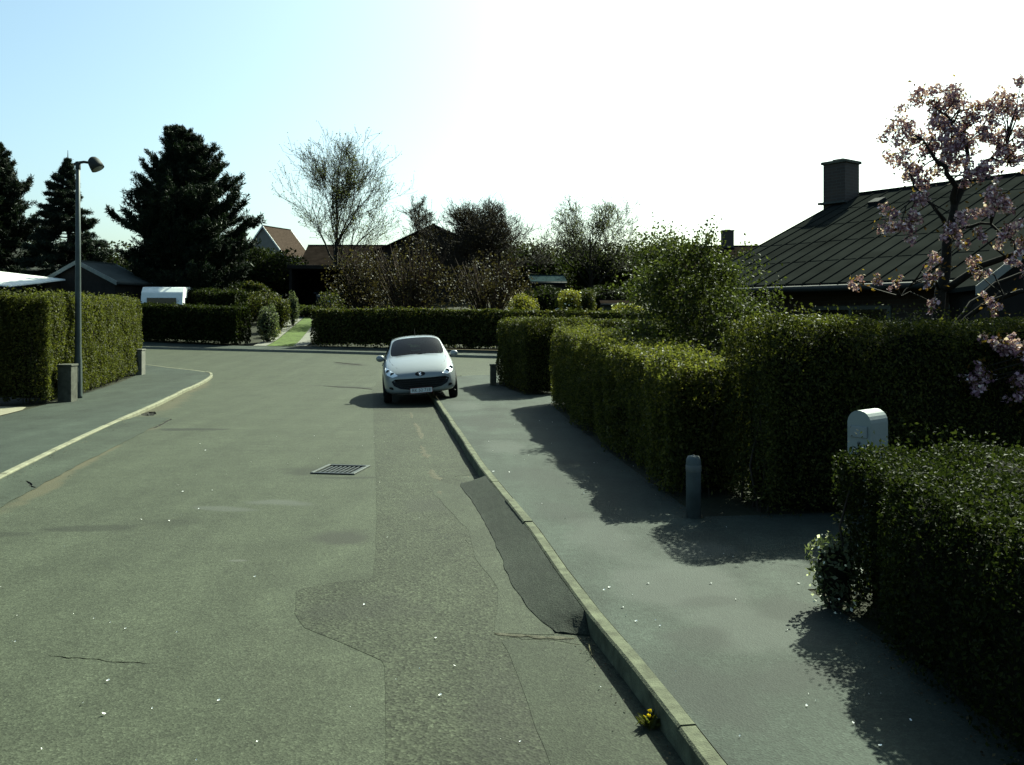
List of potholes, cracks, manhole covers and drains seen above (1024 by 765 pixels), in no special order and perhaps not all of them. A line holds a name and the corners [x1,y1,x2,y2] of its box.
crack [49,655,148,664]
drain grate [310,464,370,475]
crack [494,633,582,645]
